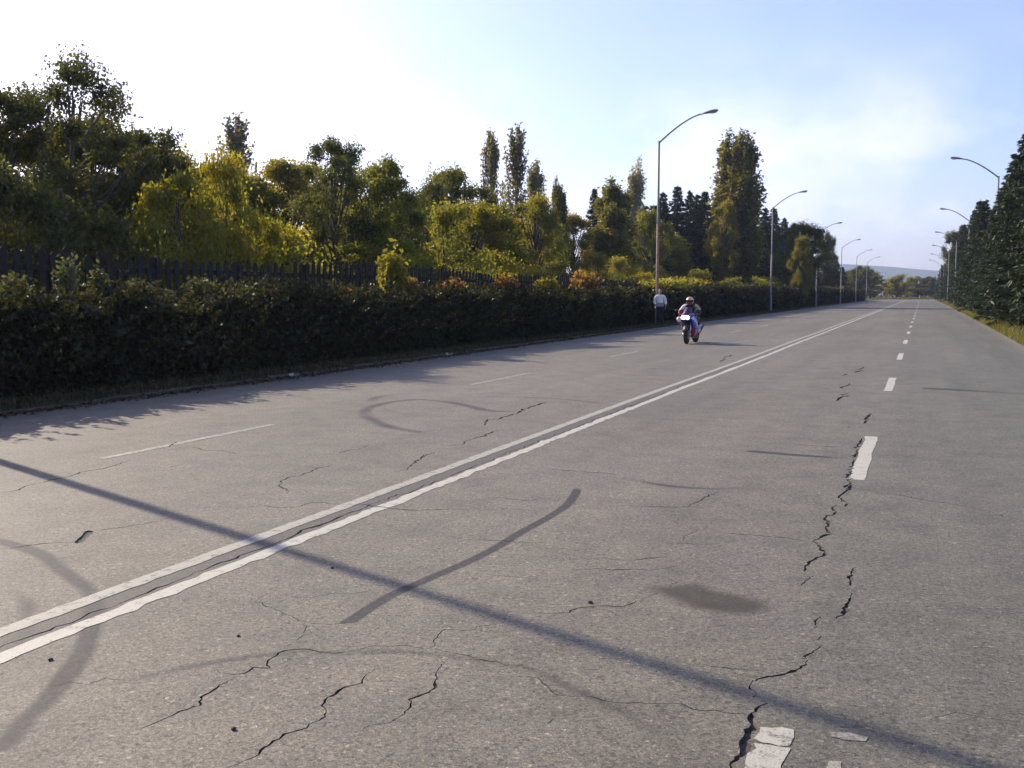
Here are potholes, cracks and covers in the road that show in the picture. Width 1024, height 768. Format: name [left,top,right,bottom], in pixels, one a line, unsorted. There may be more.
crack [88,367,1014,768]
